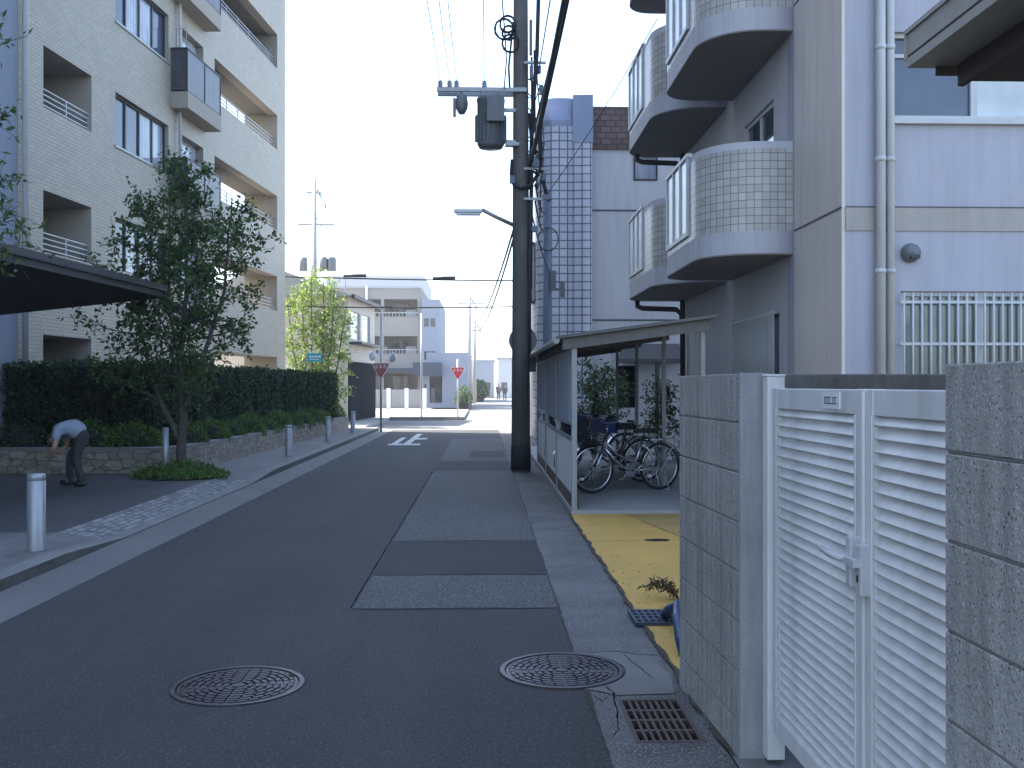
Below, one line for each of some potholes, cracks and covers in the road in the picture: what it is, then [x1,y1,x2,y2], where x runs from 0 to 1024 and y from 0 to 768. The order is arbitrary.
manhole cover [498,652,626,691]
crack [594,687,620,737]
drain grate [617,698,706,743]
manhole cover [167,666,307,707]
